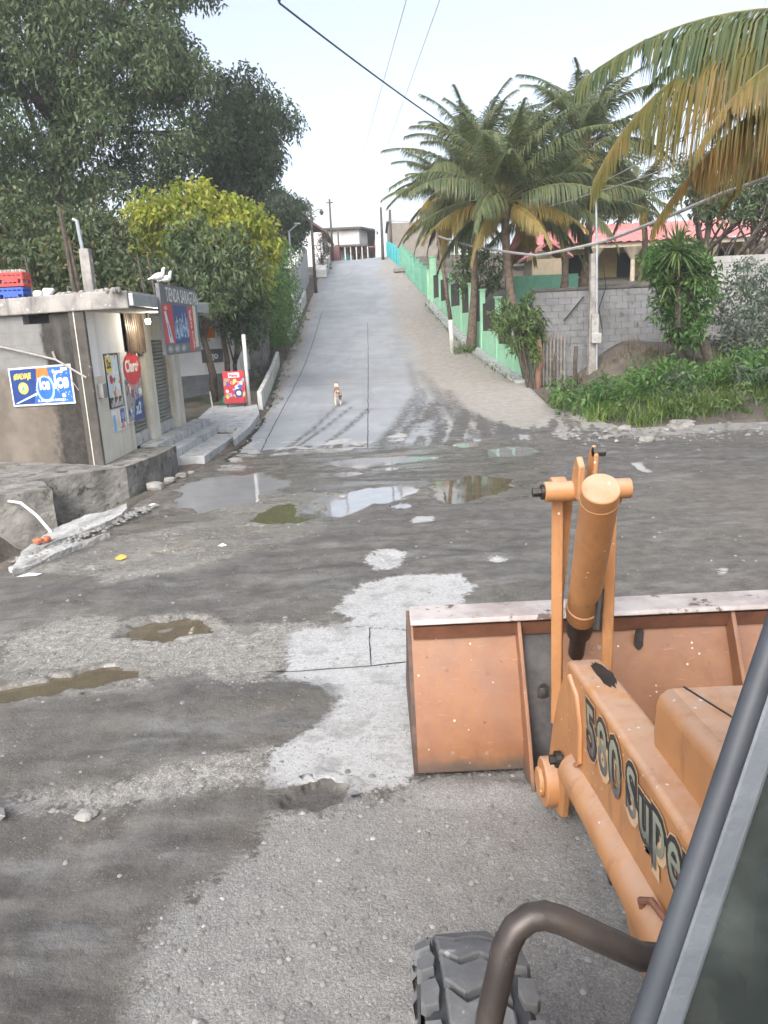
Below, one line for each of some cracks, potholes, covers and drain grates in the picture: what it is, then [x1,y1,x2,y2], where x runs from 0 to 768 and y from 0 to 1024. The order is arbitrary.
pothole [262,770,366,823]
pothole [98,609,234,647]
